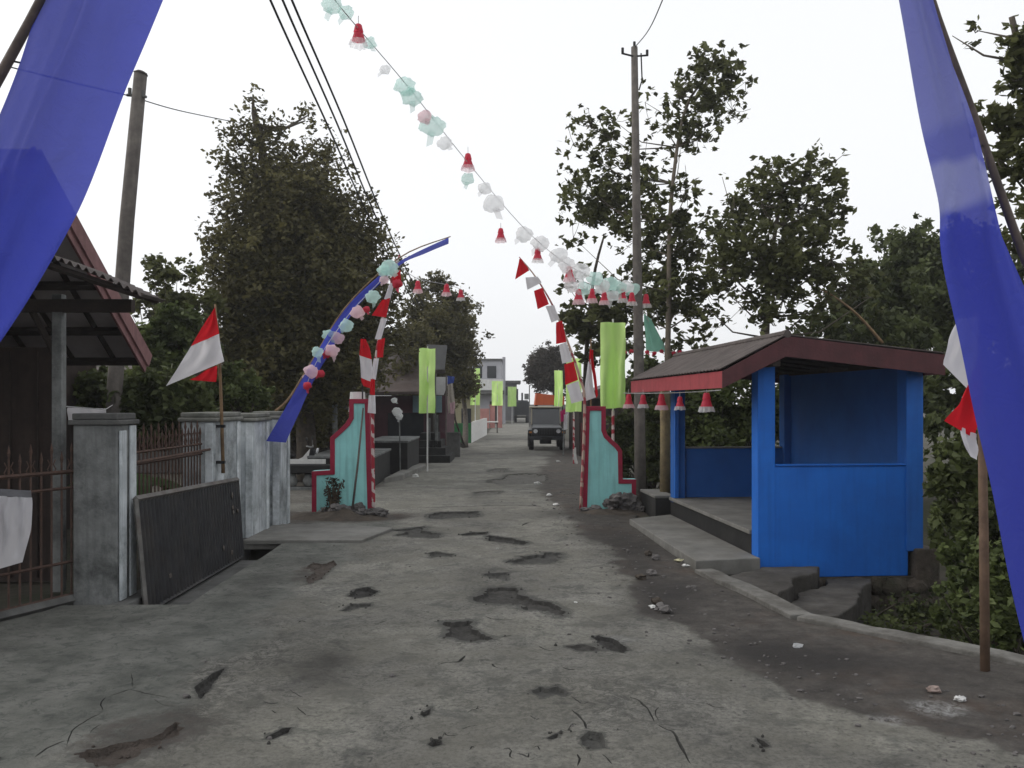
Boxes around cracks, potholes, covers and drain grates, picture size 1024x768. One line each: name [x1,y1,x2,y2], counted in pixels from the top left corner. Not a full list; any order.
crack [630,697,691,764]
pothole [506,552,562,564]
pothole [394,526,441,538]
pothole [74,722,185,768]
pothole [424,511,479,519]
pothole [473,587,569,617]
pothole [305,560,337,584]
pothole [554,643,604,653]
pothole [437,618,506,642]
pothole [348,587,378,599]
pothole [568,728,619,749]
pothole [482,571,510,580]
